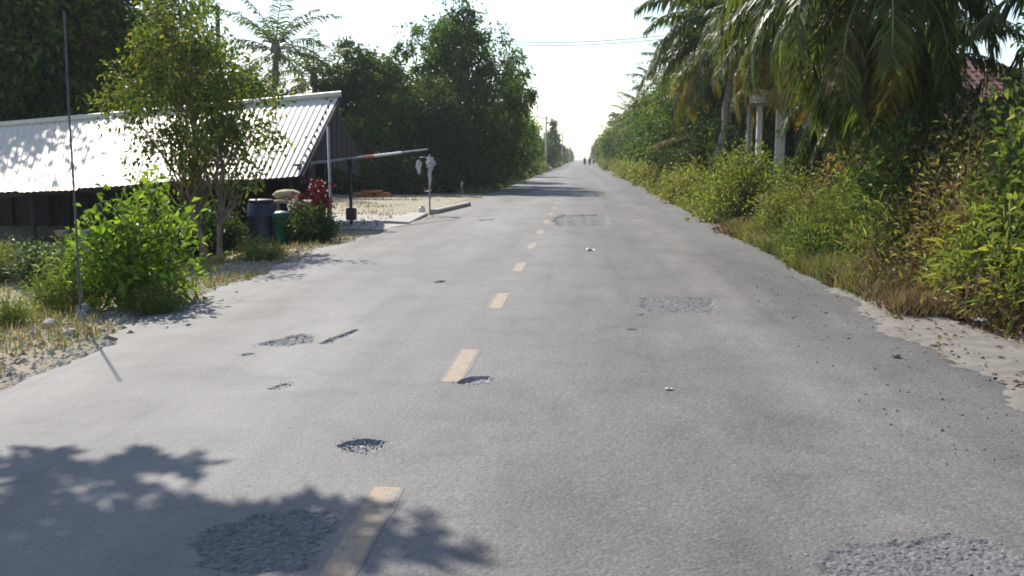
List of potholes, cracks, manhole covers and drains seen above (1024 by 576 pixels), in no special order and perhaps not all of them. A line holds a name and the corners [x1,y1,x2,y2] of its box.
pothole [319,329,358,344]
pothole [457,376,495,385]
pothole [337,438,387,453]
